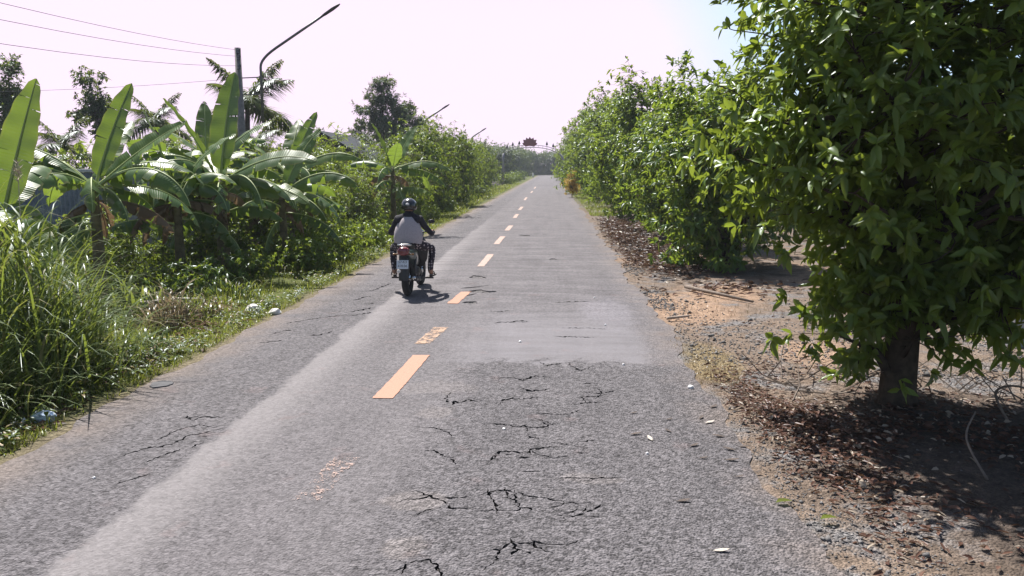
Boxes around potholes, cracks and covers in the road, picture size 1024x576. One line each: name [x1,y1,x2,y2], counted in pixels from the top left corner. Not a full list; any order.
crack [400,362,617,518]
crack [107,416,228,485]
crack [484,538,586,570]
crack [260,284,389,343]
crack [390,559,443,576]
